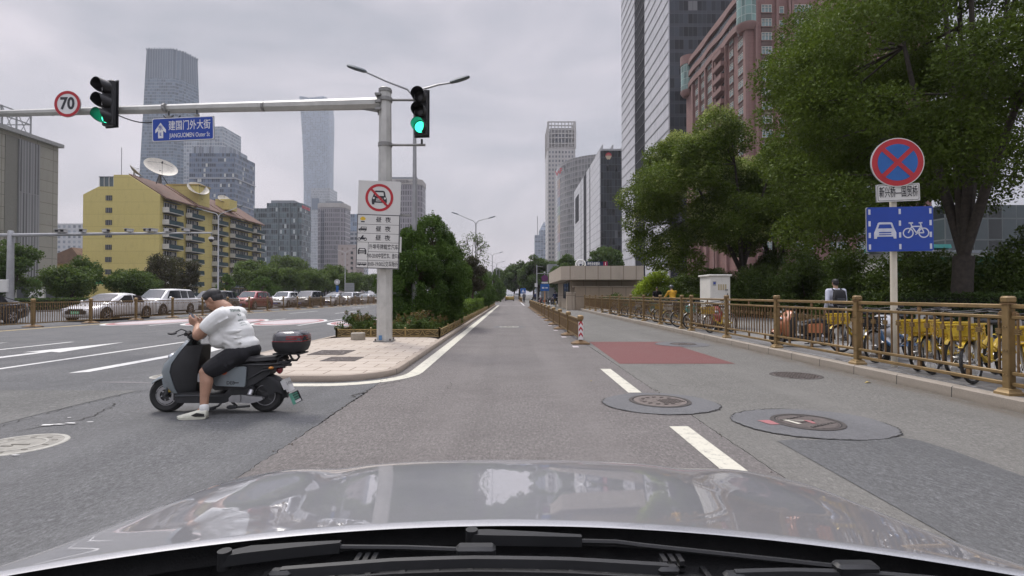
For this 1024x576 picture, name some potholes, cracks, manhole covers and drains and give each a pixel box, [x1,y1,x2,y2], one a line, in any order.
manhole cover [0,433,71,456]
crack [3,377,142,431]
manhole cover [770,414,847,431]
manhole cover [629,395,692,407]
